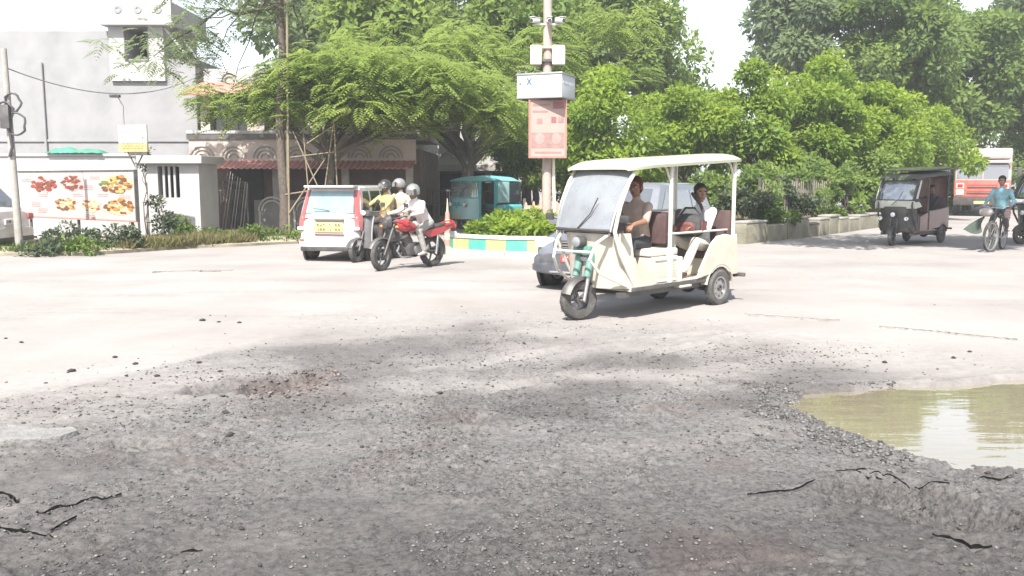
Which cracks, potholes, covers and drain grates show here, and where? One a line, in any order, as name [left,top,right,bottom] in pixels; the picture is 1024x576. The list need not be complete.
crack [931,526,993,553]
crack [0,492,122,540]
crack [747,479,815,496]
crack [836,468,950,514]
pothole [771,371,1024,477]
pothole [235,371,337,396]
